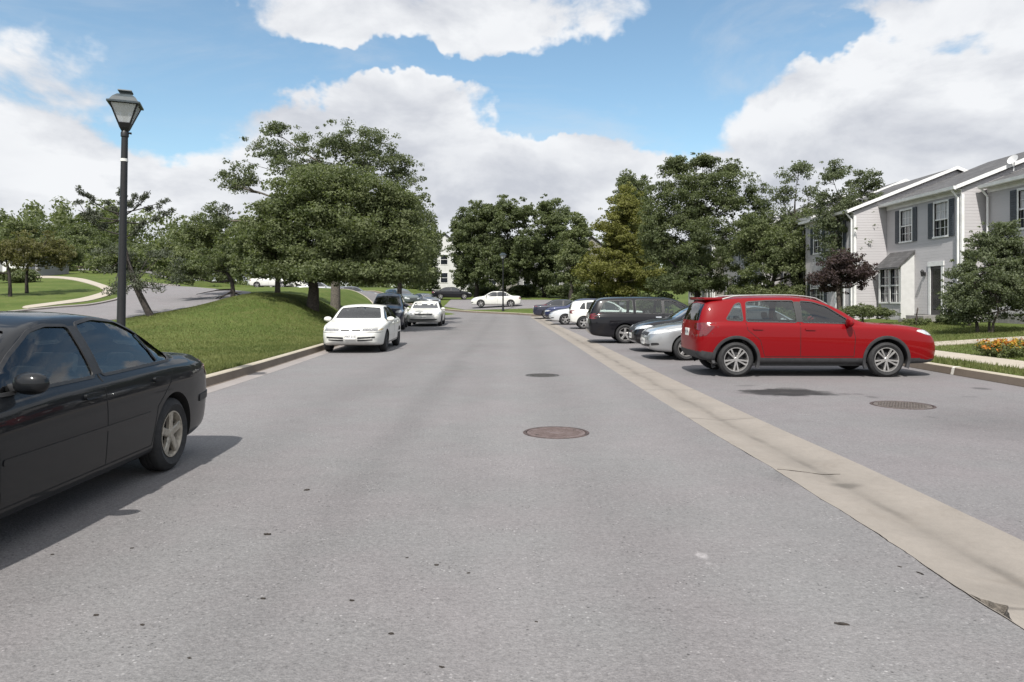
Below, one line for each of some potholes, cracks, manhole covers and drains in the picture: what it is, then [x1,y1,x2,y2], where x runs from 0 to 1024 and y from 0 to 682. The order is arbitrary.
manhole cover [523,426,589,439]
manhole cover [869,401,937,410]
